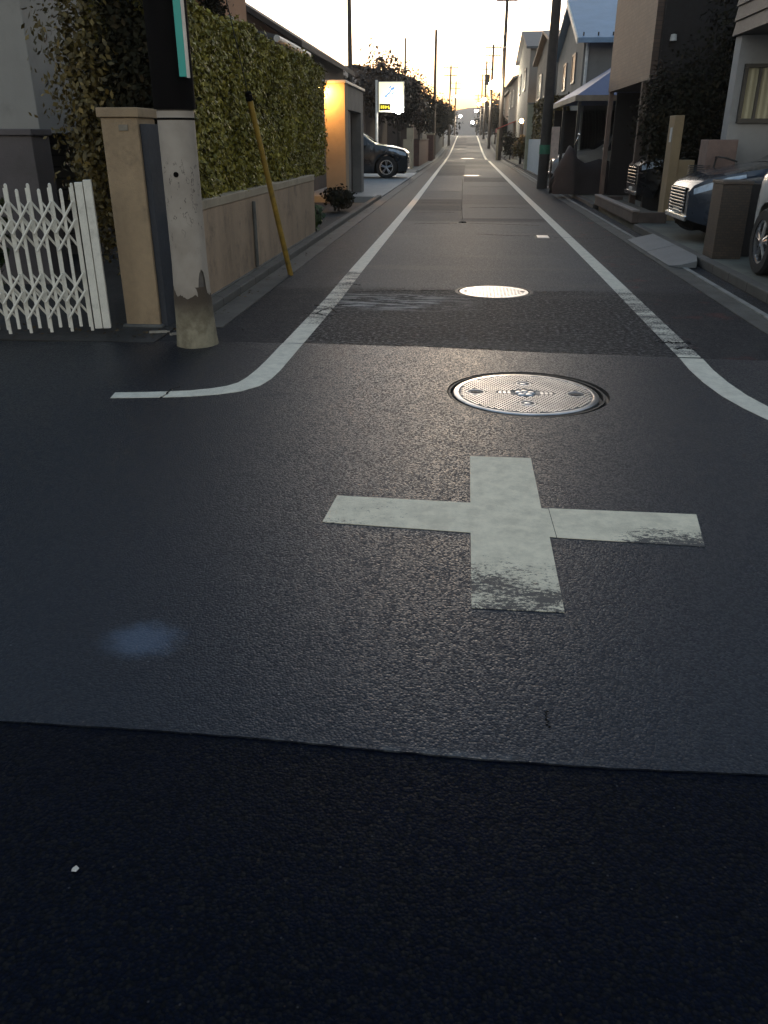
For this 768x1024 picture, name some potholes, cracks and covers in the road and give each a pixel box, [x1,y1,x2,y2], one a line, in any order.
manhole cover [447,372,610,417]
manhole cover [455,285,533,299]
